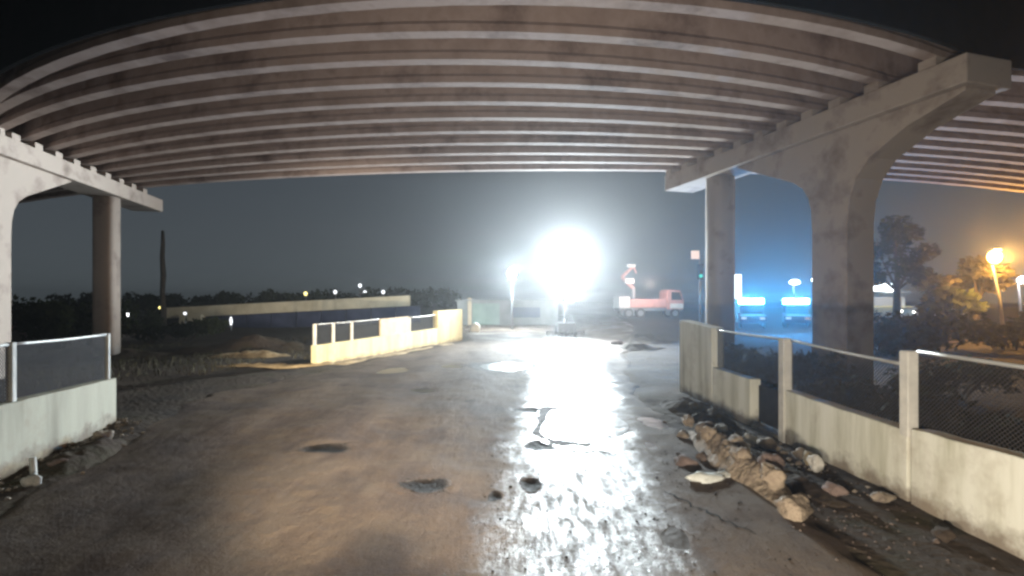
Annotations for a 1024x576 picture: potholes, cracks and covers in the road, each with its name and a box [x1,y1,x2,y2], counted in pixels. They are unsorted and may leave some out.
pothole [295,442,351,453]
pothole [396,478,453,494]
crack [664,491,756,534]
pothole [487,489,503,502]
pothole [519,477,542,494]
